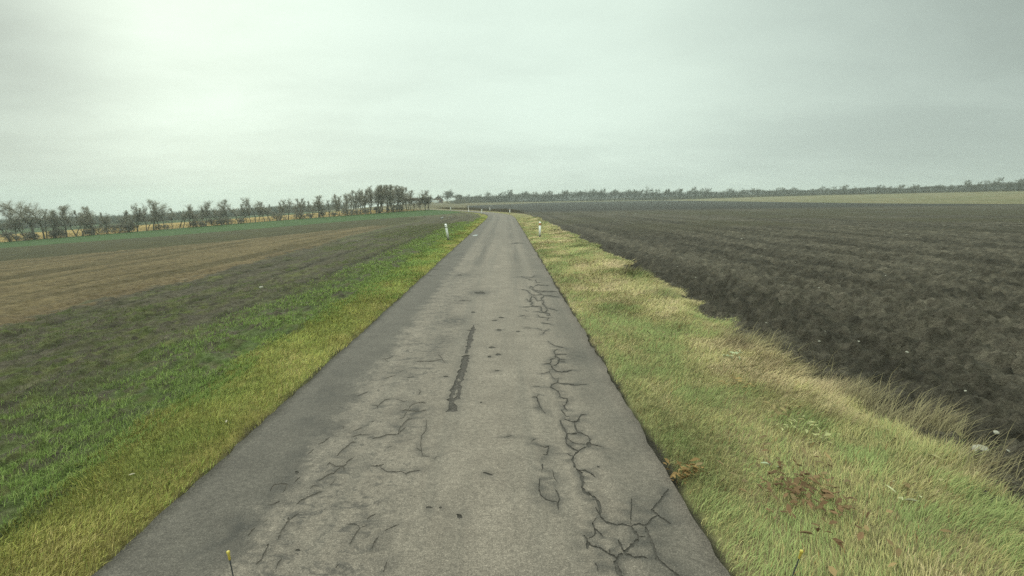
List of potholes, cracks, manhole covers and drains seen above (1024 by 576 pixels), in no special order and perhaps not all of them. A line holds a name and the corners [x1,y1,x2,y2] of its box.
crack [522,275,680,576]
crack [248,325,476,568]
